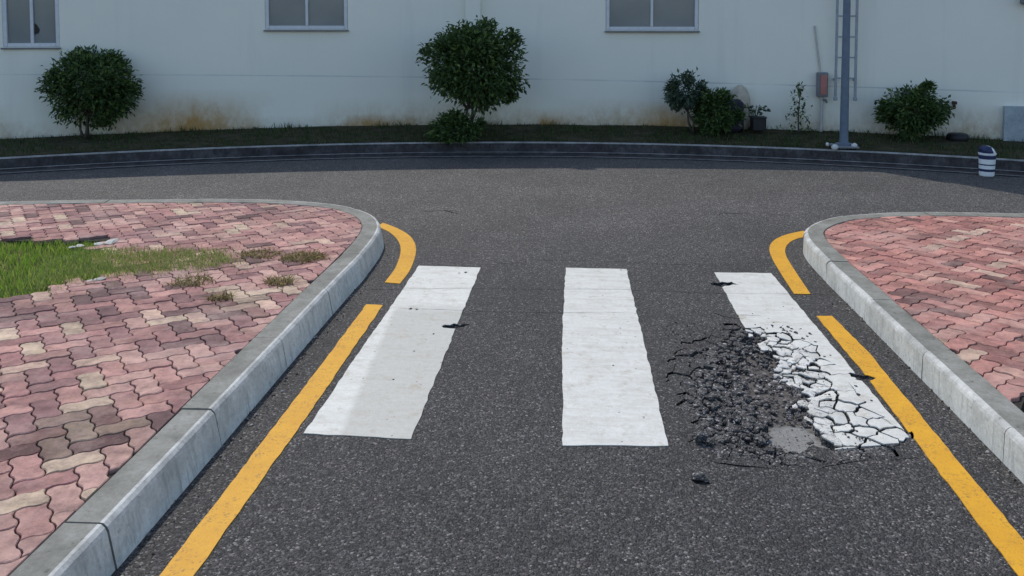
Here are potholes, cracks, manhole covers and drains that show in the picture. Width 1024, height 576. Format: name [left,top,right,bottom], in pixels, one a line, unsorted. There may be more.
pothole [667,326,867,469]
crack [776,333,912,468]
pothole [849,373,875,382]
crack [666,313,740,395]
